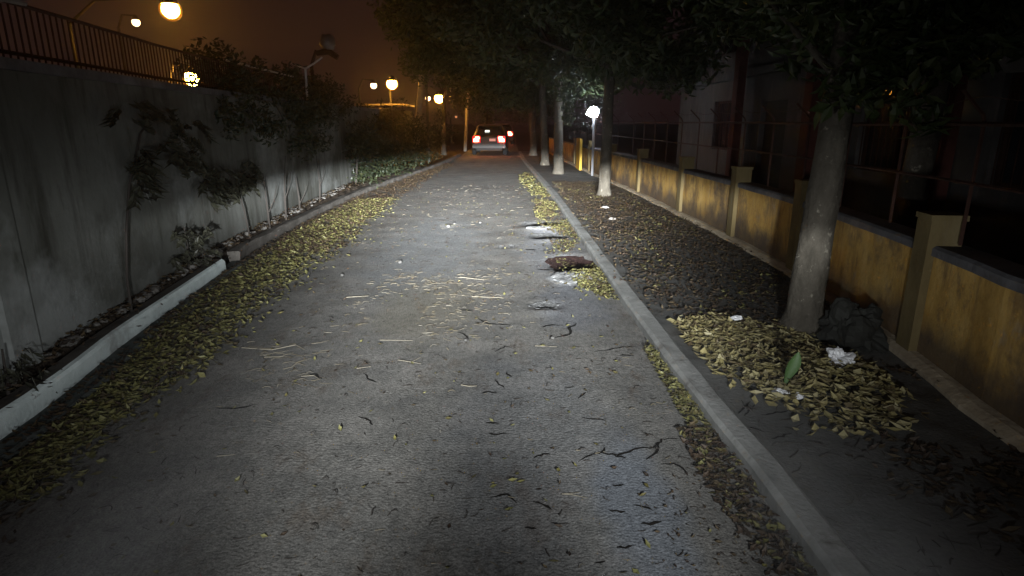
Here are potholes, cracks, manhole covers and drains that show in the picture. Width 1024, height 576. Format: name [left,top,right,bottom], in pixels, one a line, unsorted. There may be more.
crack [581,438,688,473]
pothole [545,256,597,285]
pothole [528,300,560,309]
